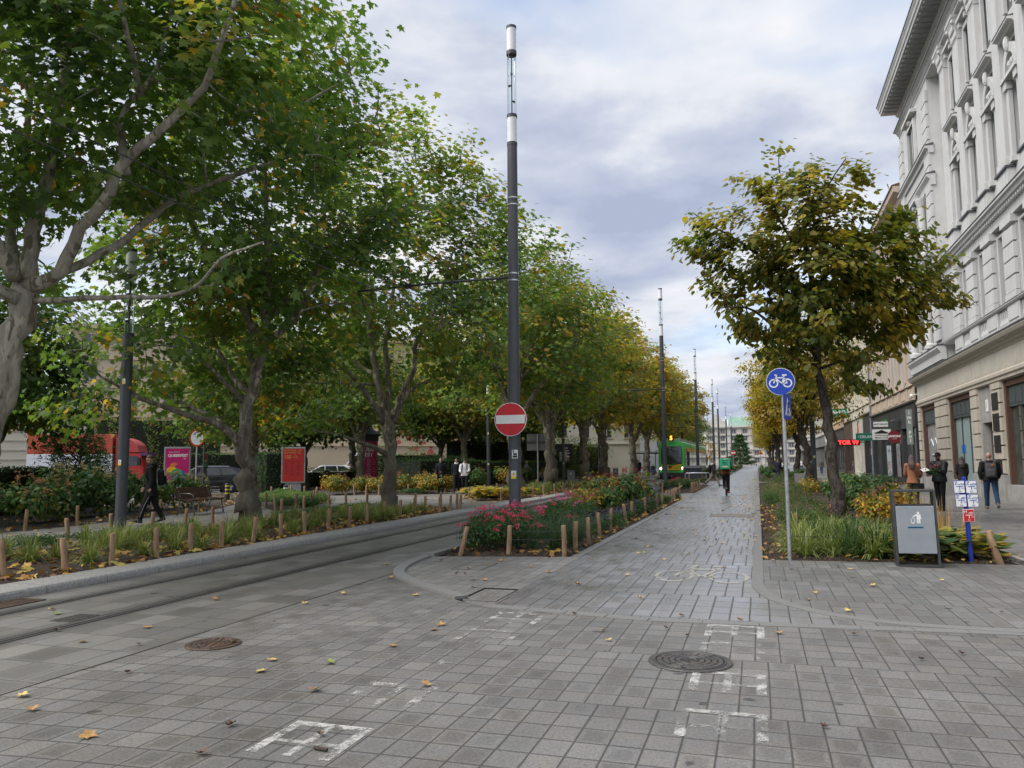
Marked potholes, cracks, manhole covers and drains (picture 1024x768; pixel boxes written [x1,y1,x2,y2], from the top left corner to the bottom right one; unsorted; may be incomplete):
manhole cover [459,588,519,602]
drain grate [0,598,46,609]
manhole cover [184,637,242,651]
manhole cover [648,651,733,673]
